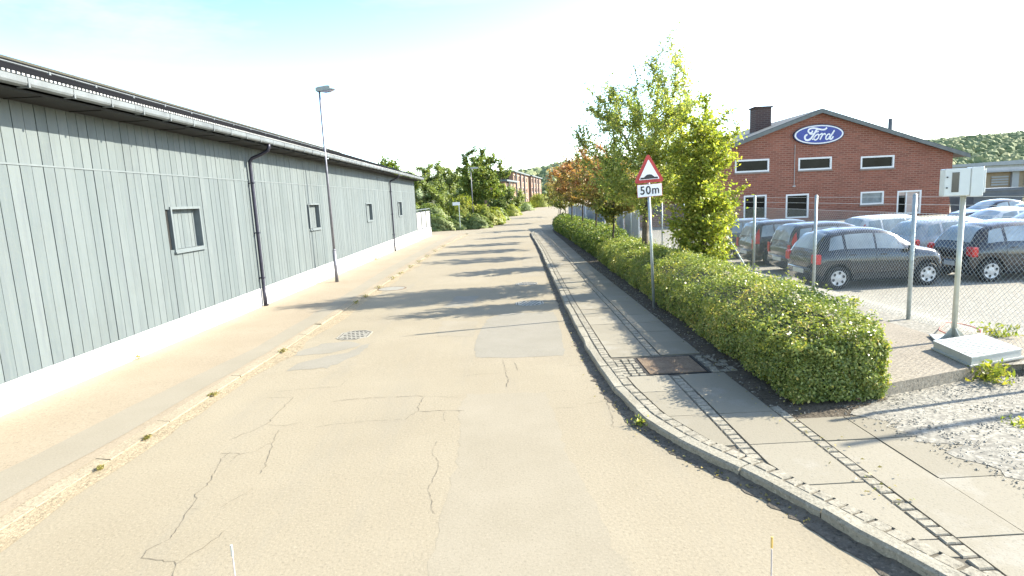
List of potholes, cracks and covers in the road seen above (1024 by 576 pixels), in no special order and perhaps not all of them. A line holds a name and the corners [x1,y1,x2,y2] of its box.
crack [319,396,461,427]
crack [141,387,324,573]
utility cover [633,355,711,376]
